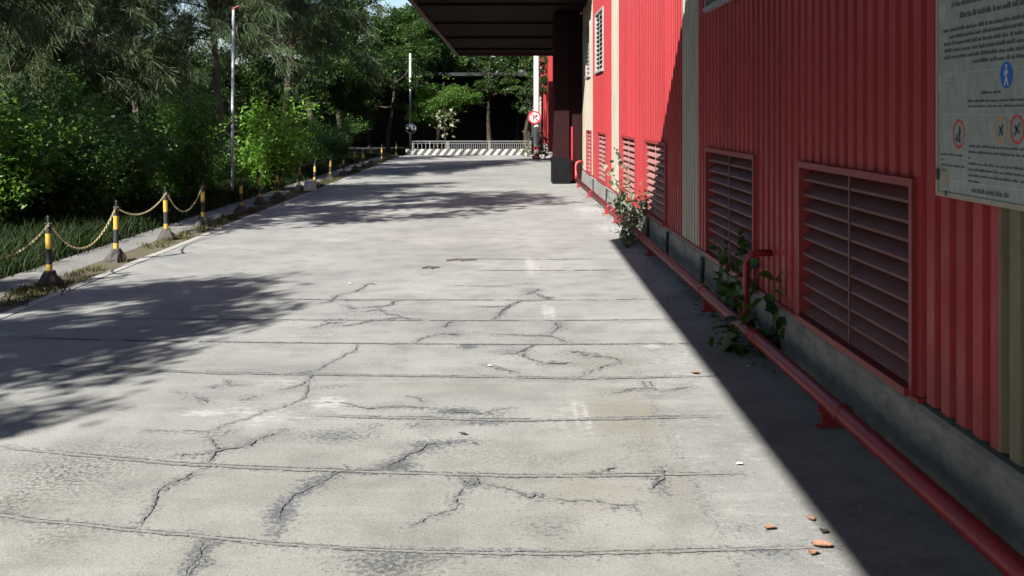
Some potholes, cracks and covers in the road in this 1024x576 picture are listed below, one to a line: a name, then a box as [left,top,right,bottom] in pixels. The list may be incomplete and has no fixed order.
crack [183,542,210,576]
crack [135,344,357,527]
crack [277,441,454,522]
crack [313,283,453,341]
crack [313,396,509,414]
crack [648,467,669,494]
crack [416,475,636,523]
crack [490,288,625,377]
